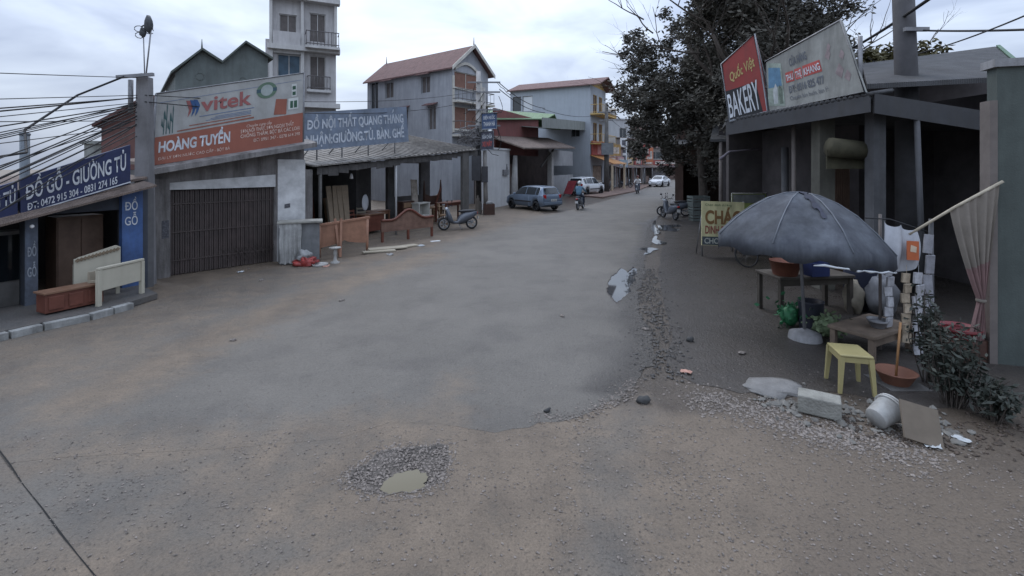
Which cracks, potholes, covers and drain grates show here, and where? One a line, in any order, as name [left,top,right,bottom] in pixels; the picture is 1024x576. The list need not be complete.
pothole [335,439,460,504]
pothole [606,267,638,303]
